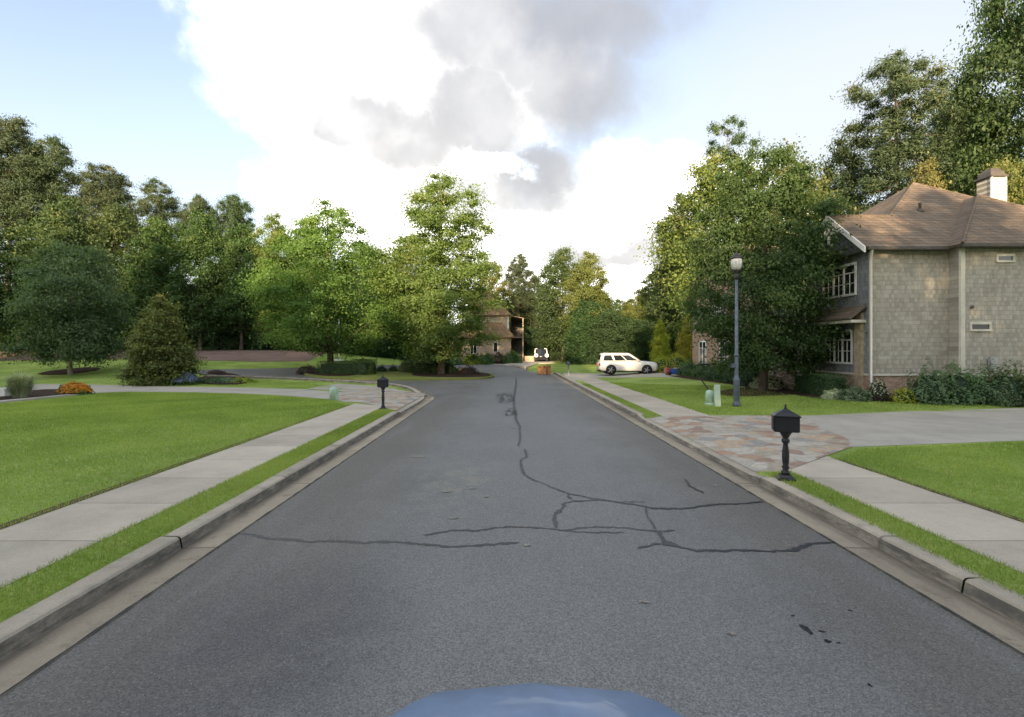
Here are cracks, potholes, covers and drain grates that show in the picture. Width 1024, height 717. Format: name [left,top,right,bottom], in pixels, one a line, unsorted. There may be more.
crack [424,378,763,548]
